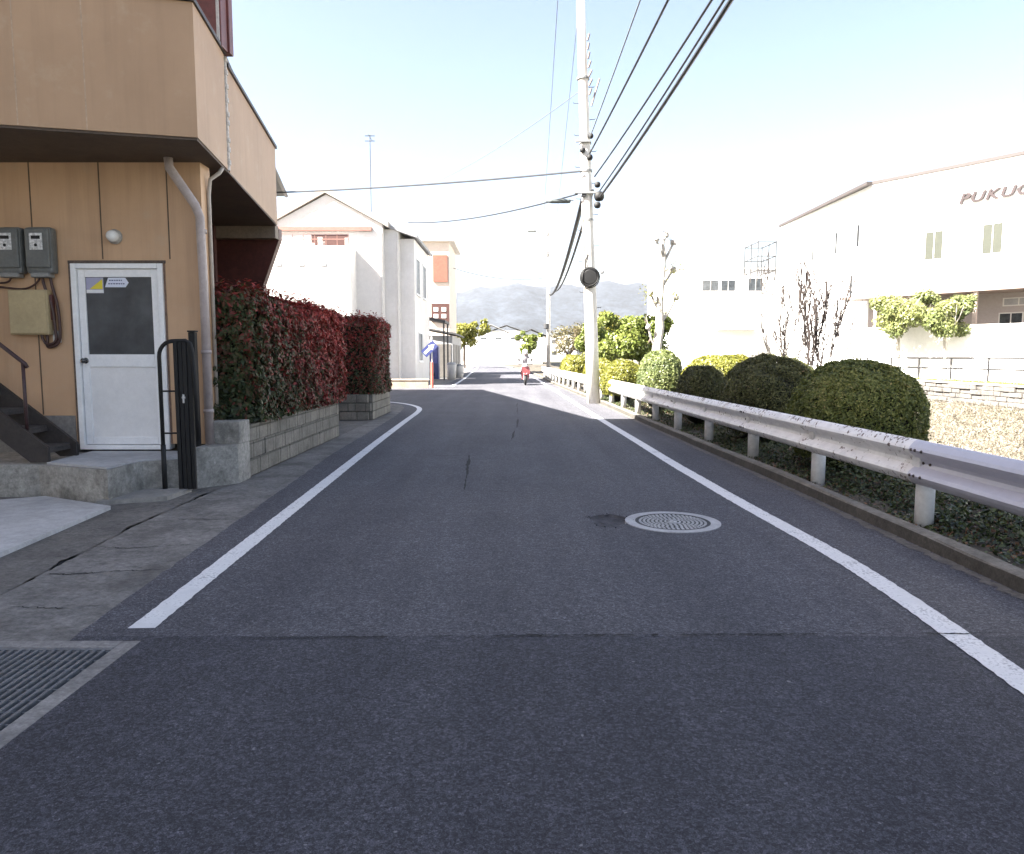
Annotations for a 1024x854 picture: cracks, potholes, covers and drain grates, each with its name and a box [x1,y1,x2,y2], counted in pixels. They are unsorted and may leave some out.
manhole cover [625,511,721,533]
drain grate [0,641,140,749]
pothole [587,513,629,528]
crack [27,495,204,582]
crack [441,455,523,492]
